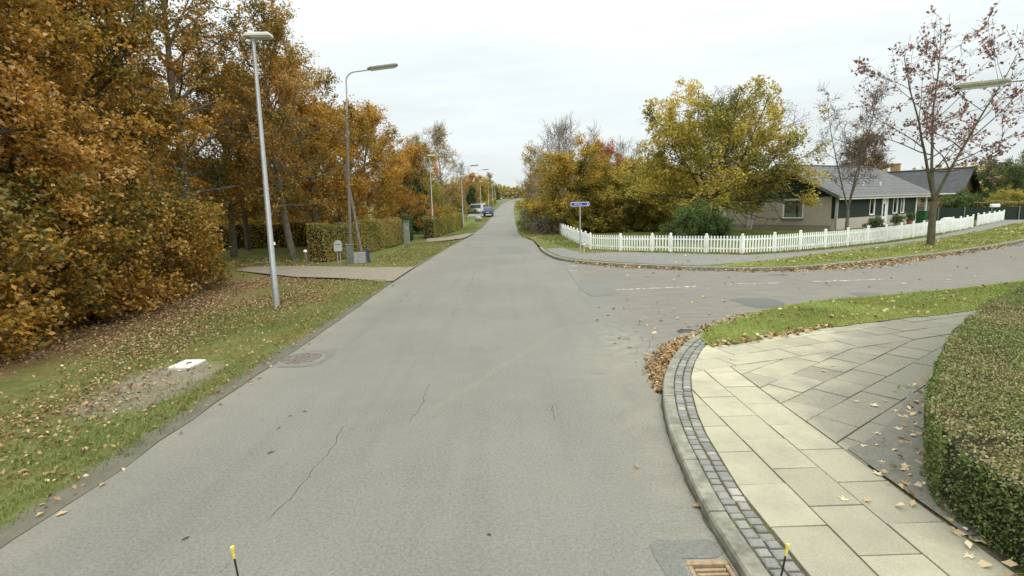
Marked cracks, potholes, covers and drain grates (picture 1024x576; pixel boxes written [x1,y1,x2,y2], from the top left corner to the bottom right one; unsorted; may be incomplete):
drain grate [685,559,736,576]
manhole cover [277,352,325,366]
crack [268,425,346,520]
